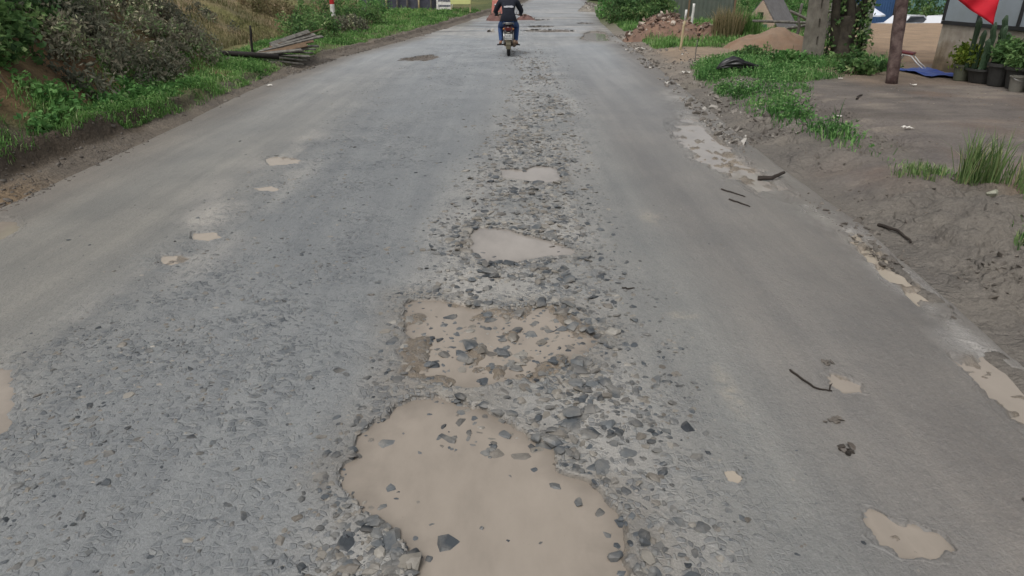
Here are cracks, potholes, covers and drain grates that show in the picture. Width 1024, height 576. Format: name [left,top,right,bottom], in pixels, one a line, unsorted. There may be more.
pothole [188,229,227,242]
pothole [249,184,285,192]
pothole [259,154,307,166]
pothole [154,251,199,268]
pothole [856,503,962,565]
pothole [818,368,871,395]
pothole [328,388,648,576]
pothole [578,30,612,42]
pothole [497,164,566,184]
pothole [463,225,583,264]
pothole [396,54,442,62]
